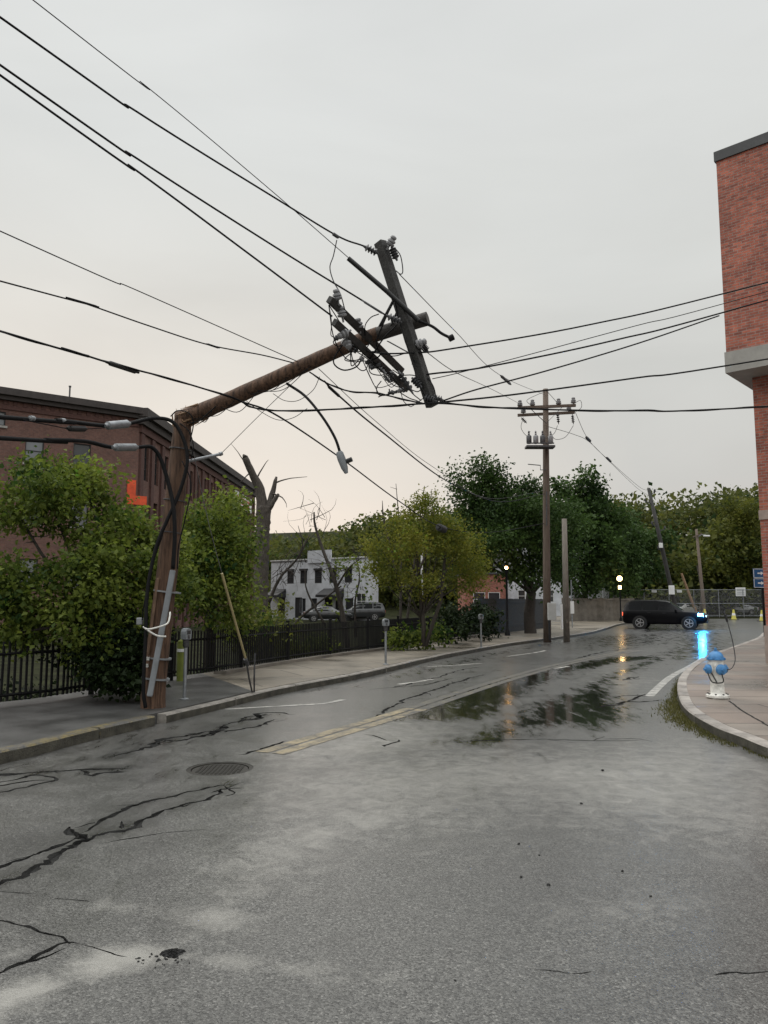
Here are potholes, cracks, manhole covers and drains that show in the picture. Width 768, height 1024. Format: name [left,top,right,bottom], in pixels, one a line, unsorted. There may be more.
crack [369,667,485,717]
manhole cover [186,762,253,776]
crack [0,712,296,902]
crack [0,920,125,974]
pothole [160,948,186,959]
